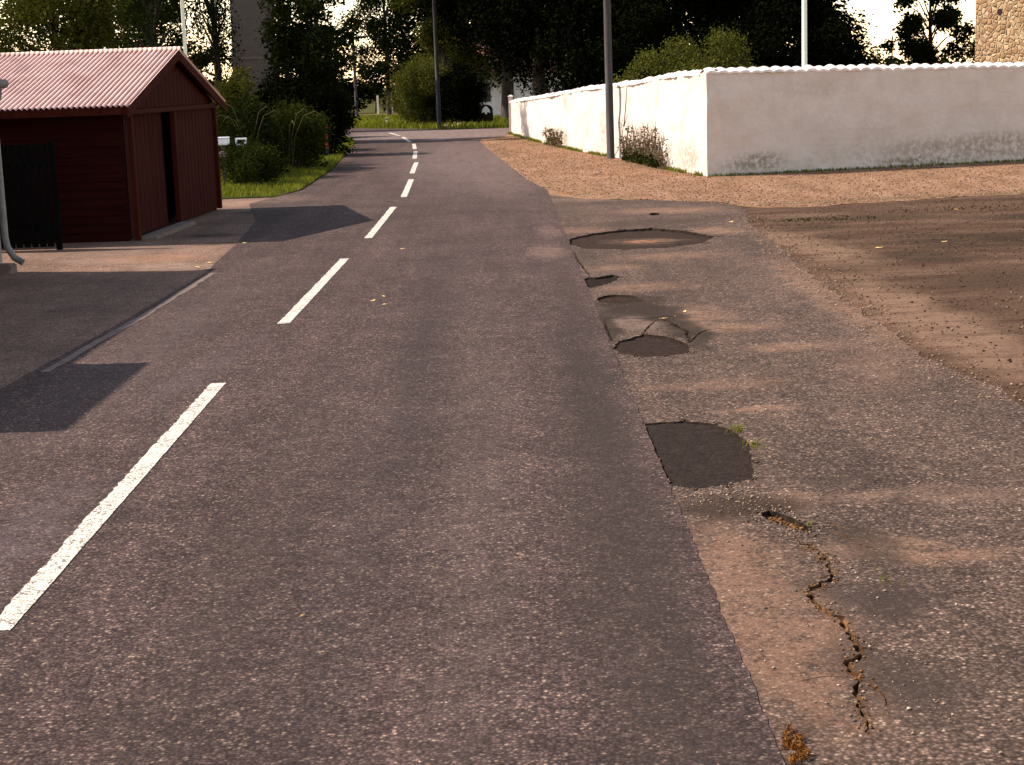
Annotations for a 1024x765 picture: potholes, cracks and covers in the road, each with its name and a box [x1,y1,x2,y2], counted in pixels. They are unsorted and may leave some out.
pothole [569,228,713,249]
pothole [584,275,621,288]
pothole [613,334,690,357]
crack [793,518,887,735]
crack [603,316,730,344]
